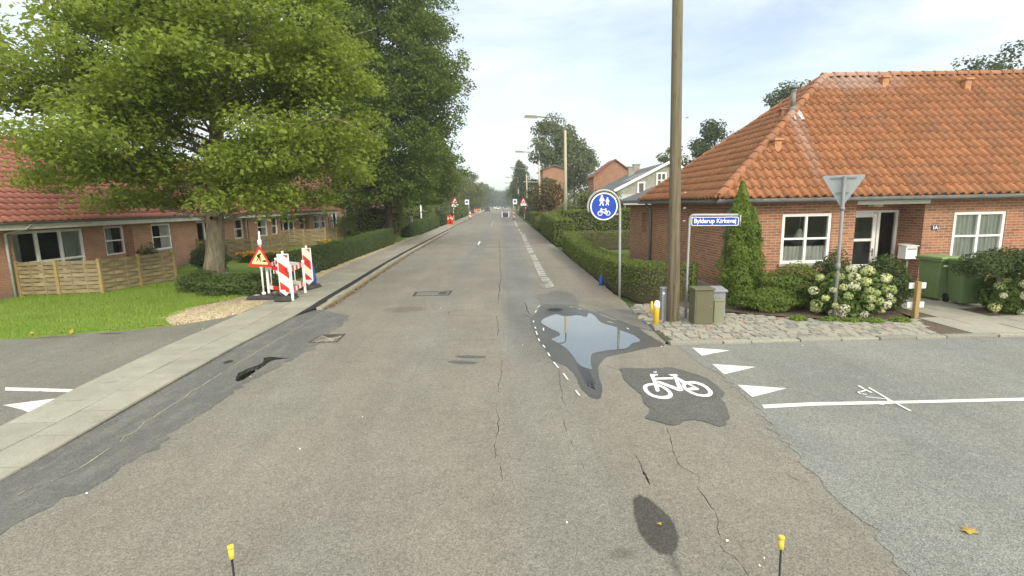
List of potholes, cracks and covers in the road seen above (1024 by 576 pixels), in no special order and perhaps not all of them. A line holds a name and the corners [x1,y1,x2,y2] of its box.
manhole cover [308,334,345,343]
pothole [236,357,287,381]
crack [667,430,748,575]
